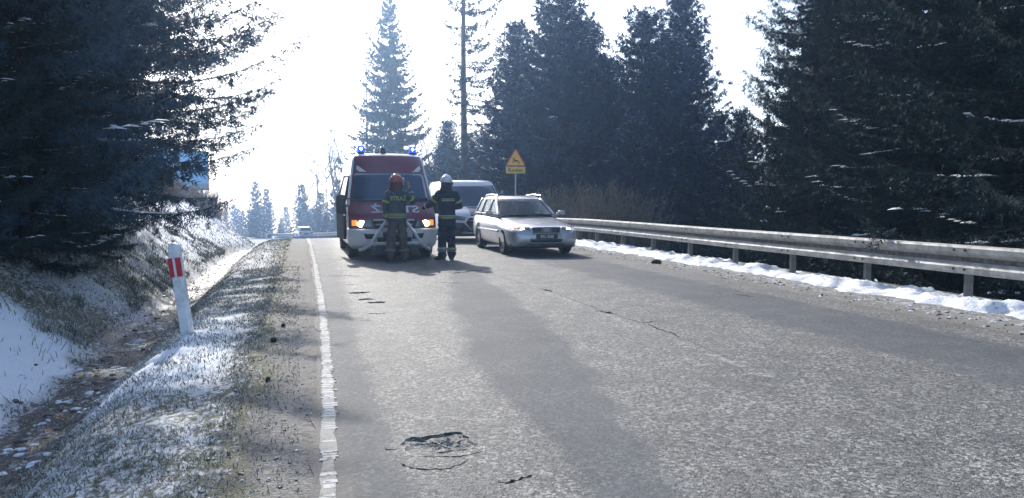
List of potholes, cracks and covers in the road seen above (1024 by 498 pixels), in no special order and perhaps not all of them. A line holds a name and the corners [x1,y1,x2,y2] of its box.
crack [496,474,534,484]
pothole [385,432,482,470]
